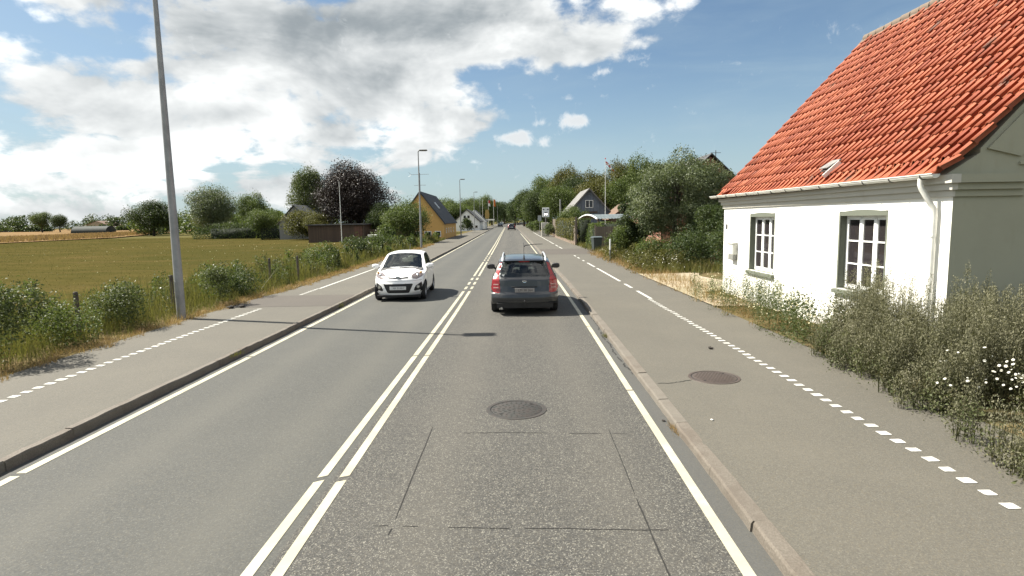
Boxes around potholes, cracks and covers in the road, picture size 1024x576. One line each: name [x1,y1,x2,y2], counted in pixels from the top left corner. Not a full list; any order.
manhole cover [688,371,741,384]
manhole cover [486,400,547,420]
